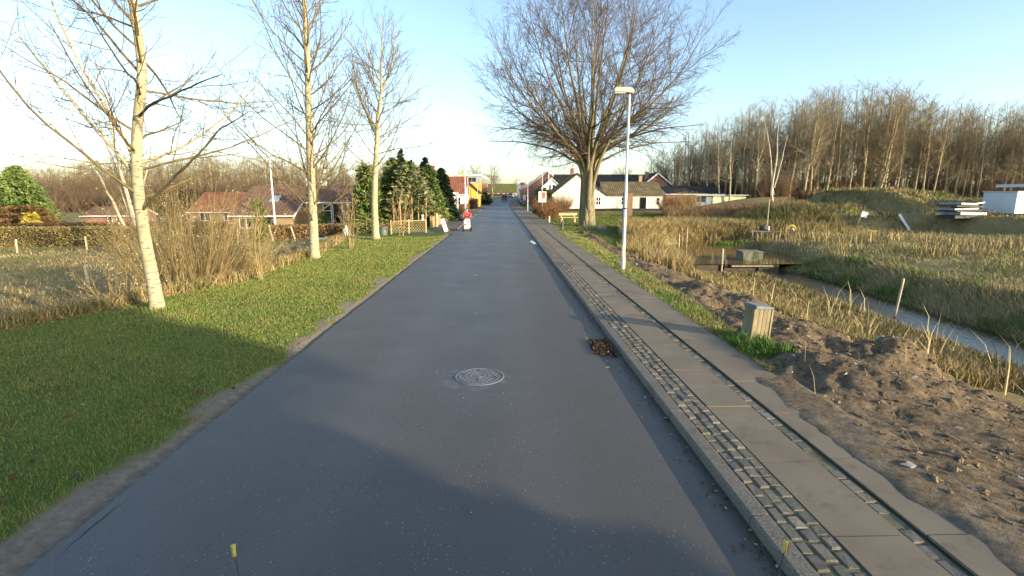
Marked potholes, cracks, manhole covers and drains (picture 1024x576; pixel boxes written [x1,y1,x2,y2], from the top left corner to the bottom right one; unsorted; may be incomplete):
manhole cover [454,368,504,386]
